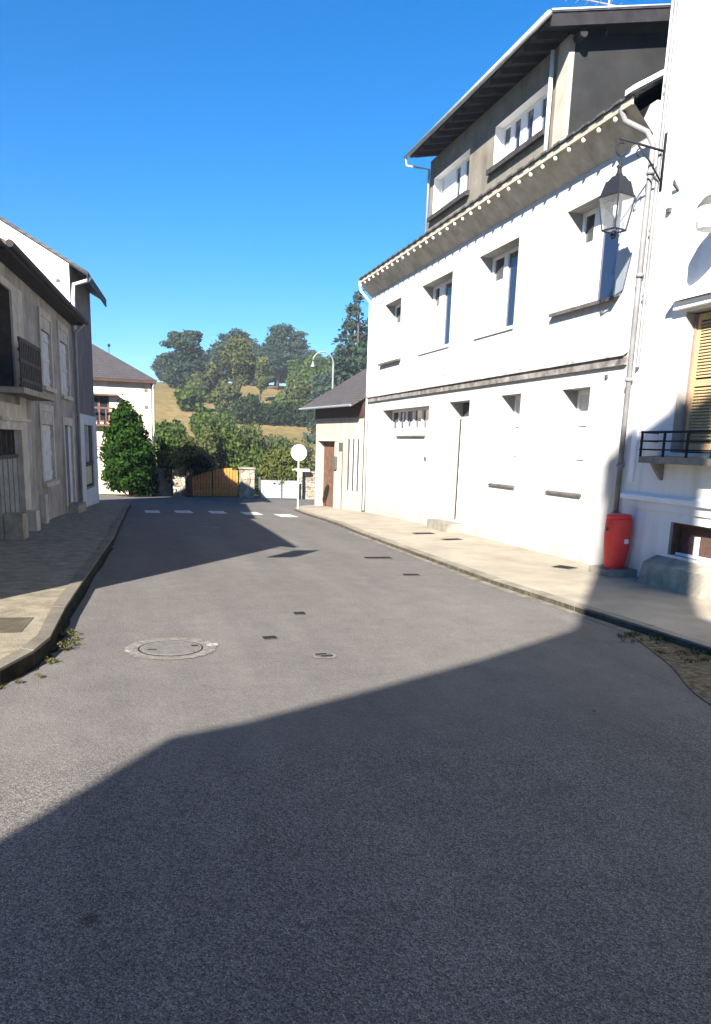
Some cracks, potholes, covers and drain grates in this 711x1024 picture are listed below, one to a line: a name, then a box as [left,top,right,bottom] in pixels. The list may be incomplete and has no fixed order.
manhole cover [124,637,218,660]
